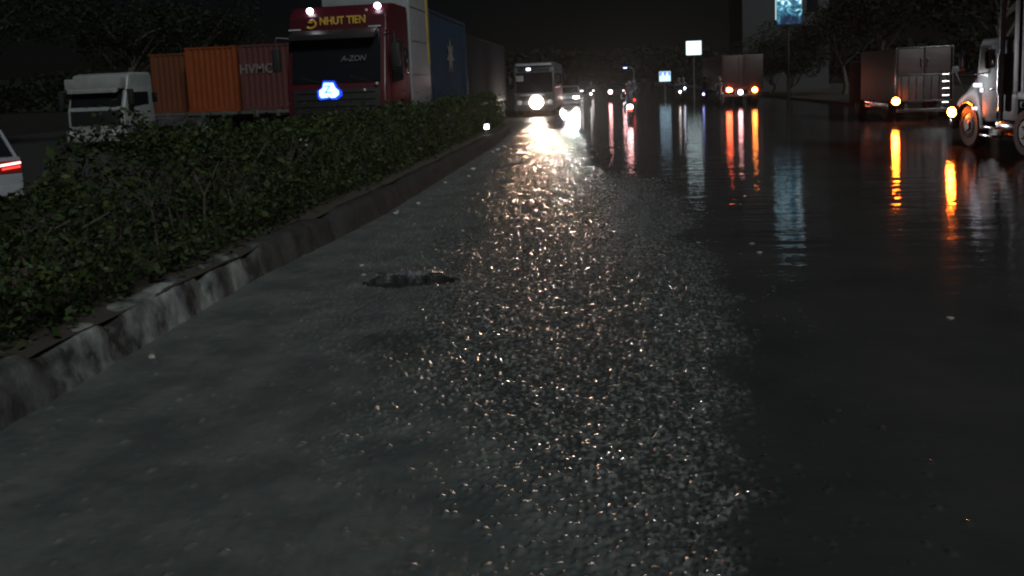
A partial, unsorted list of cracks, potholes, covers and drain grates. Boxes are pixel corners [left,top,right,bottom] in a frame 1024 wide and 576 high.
pothole [362,269,459,288]
